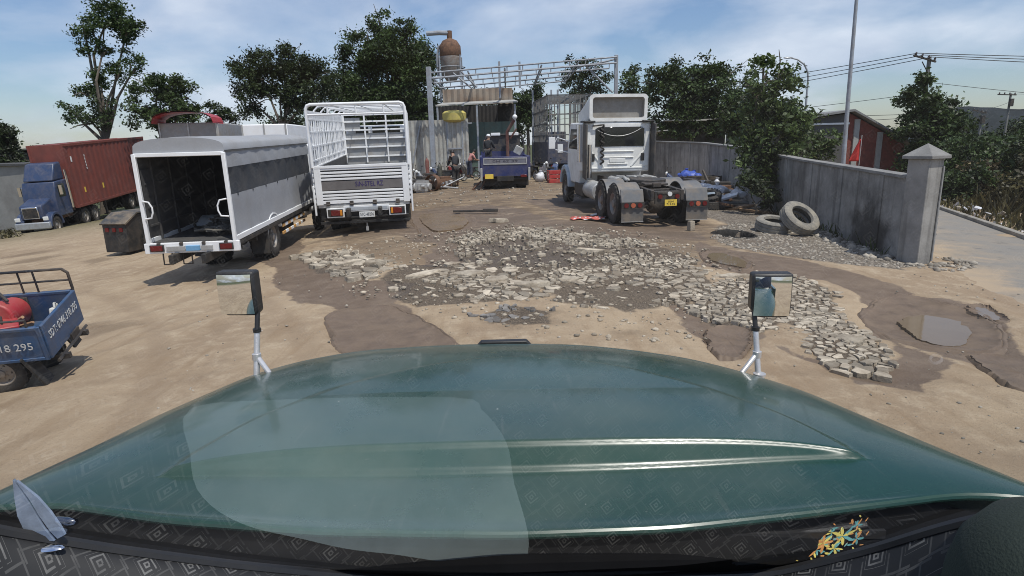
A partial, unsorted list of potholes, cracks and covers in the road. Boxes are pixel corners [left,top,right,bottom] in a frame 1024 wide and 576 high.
pothole [324,305,460,354]
pothole [857,295,1008,356]
pothole [698,250,754,272]
pothole [711,229,757,239]
pothole [702,325,753,361]
